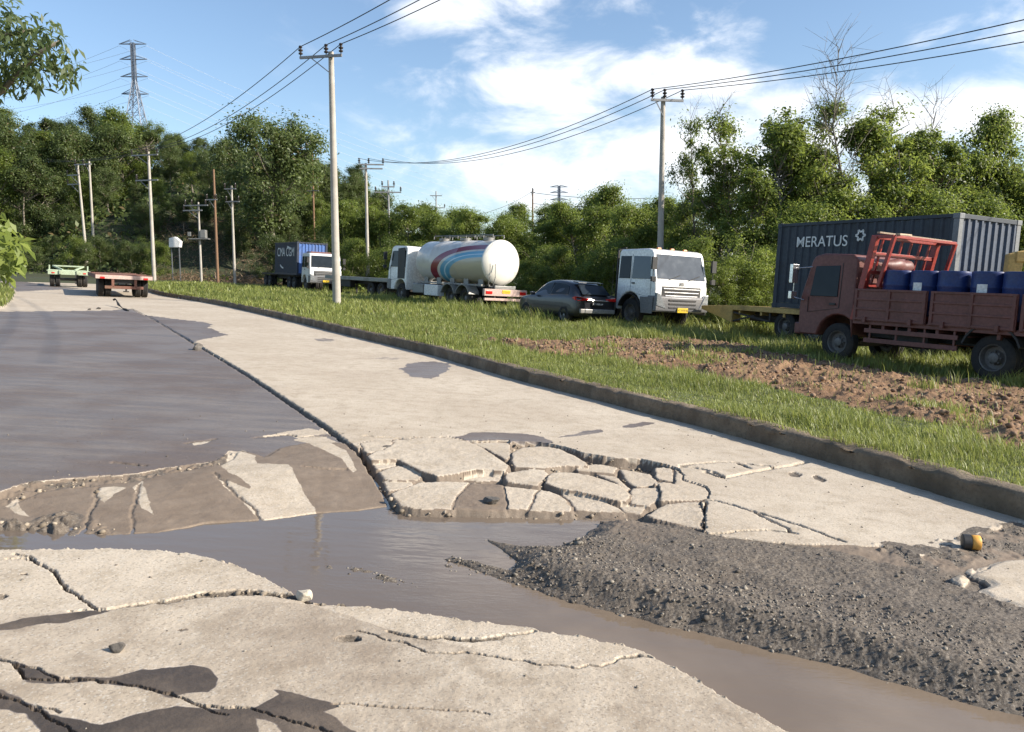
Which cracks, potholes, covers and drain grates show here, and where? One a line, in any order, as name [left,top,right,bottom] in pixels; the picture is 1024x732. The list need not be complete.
crack [82,487,100,530]
pothole [0,442,1024,716]
crack [213,472,264,520]
crack [305,435,846,543]
crack [113,461,146,534]
crack [357,630,617,669]
crack [6,553,347,613]
crack [332,702,489,714]
crack [0,659,331,732]
